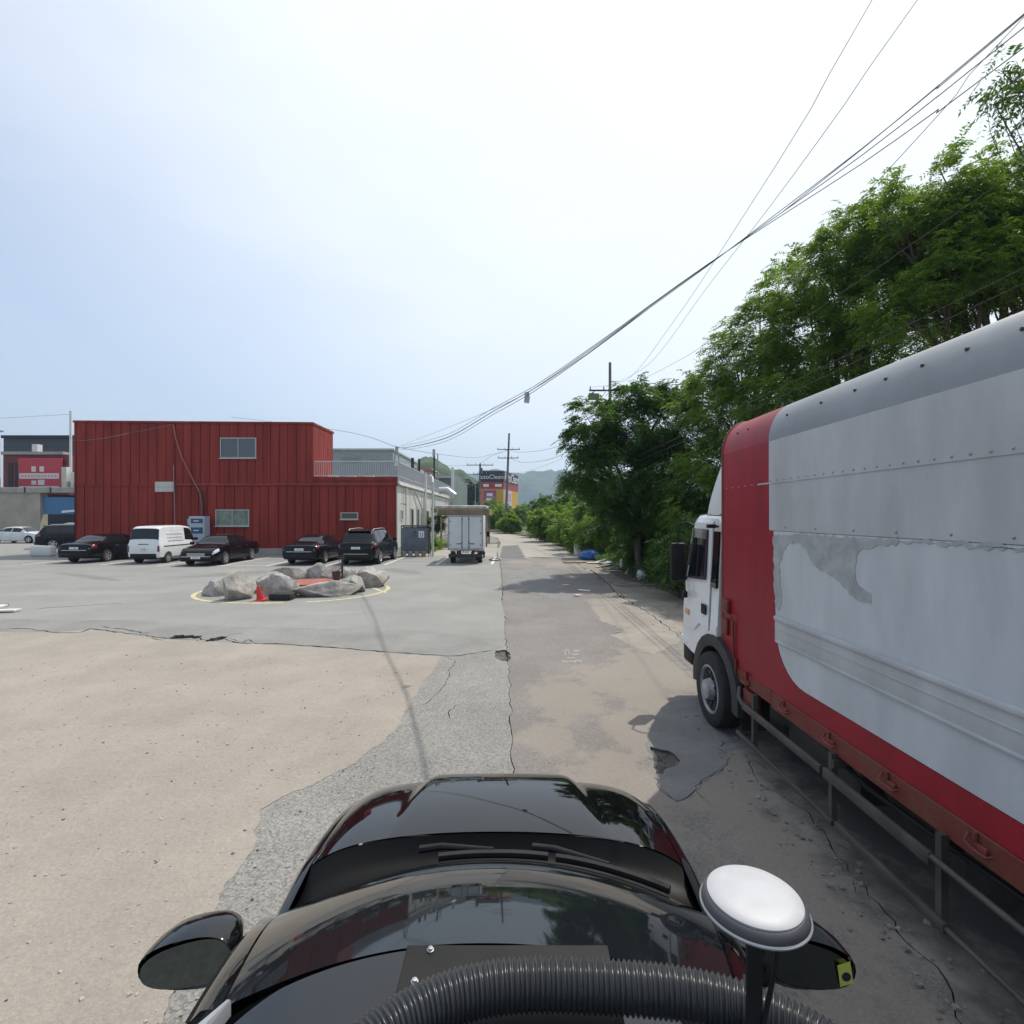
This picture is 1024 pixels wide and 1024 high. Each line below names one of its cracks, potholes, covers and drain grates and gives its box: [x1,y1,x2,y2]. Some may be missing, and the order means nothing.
pothole [495,650,511,663]
crack [590,570,678,634]
pothole [650,747,680,774]
crack [11,627,491,718]
crack [504,616,515,773]
